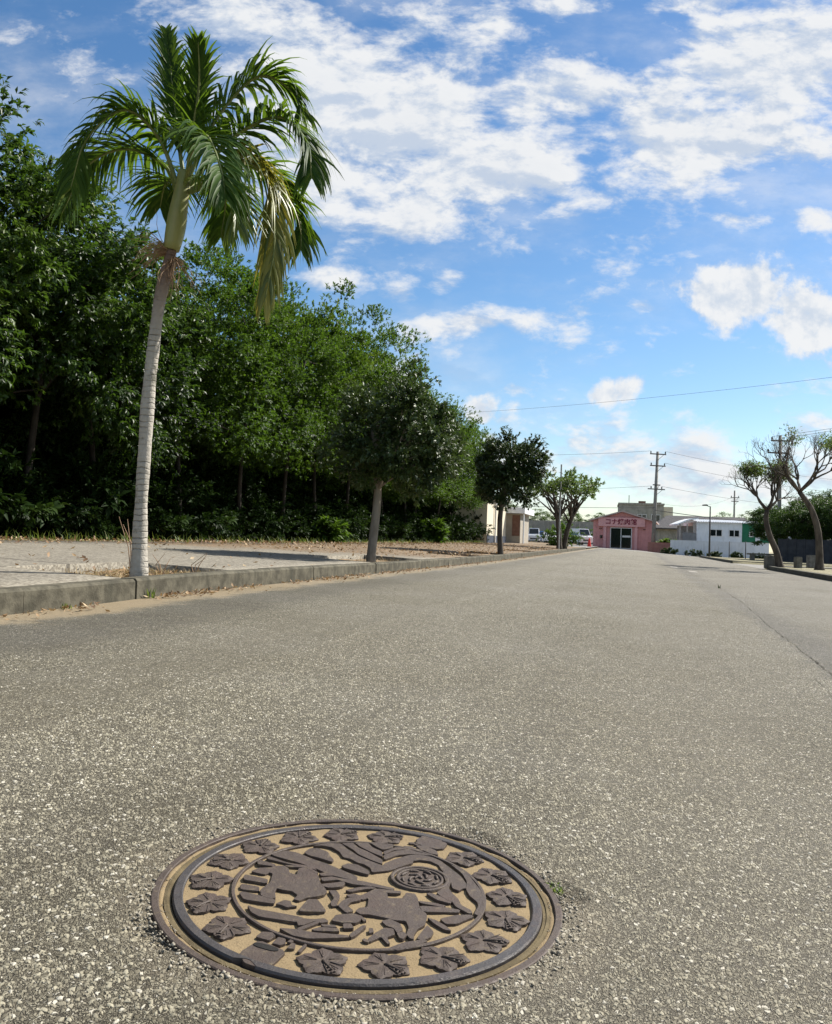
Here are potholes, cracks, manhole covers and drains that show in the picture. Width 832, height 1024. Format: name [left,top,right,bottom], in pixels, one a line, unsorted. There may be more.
manhole cover [150,819,563,1003]
